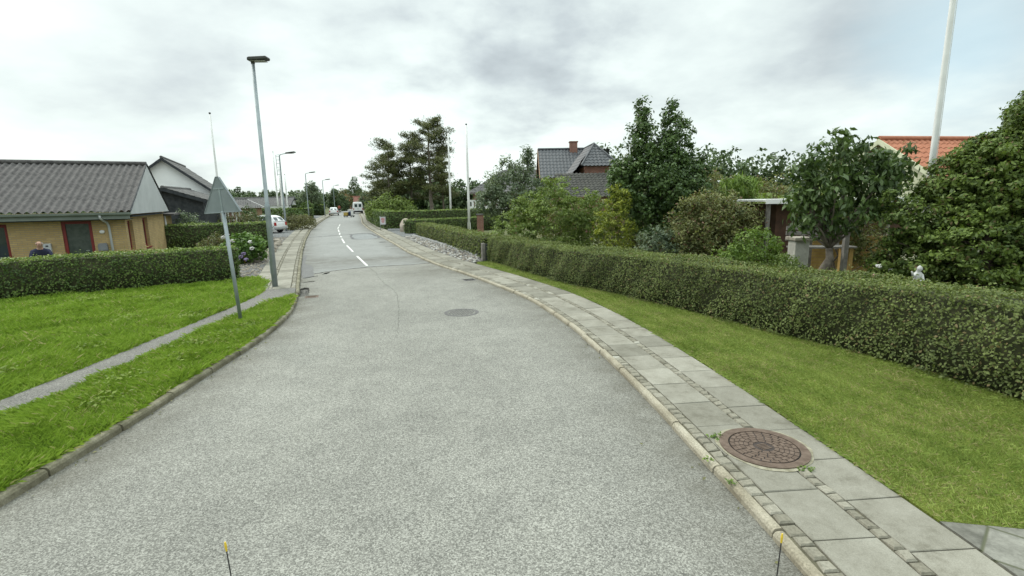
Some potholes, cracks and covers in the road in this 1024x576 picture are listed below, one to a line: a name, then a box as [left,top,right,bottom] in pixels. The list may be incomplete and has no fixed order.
manhole cover [444,309,479,317]
crack [302,263,426,337]
manhole cover [719,428,811,469]
